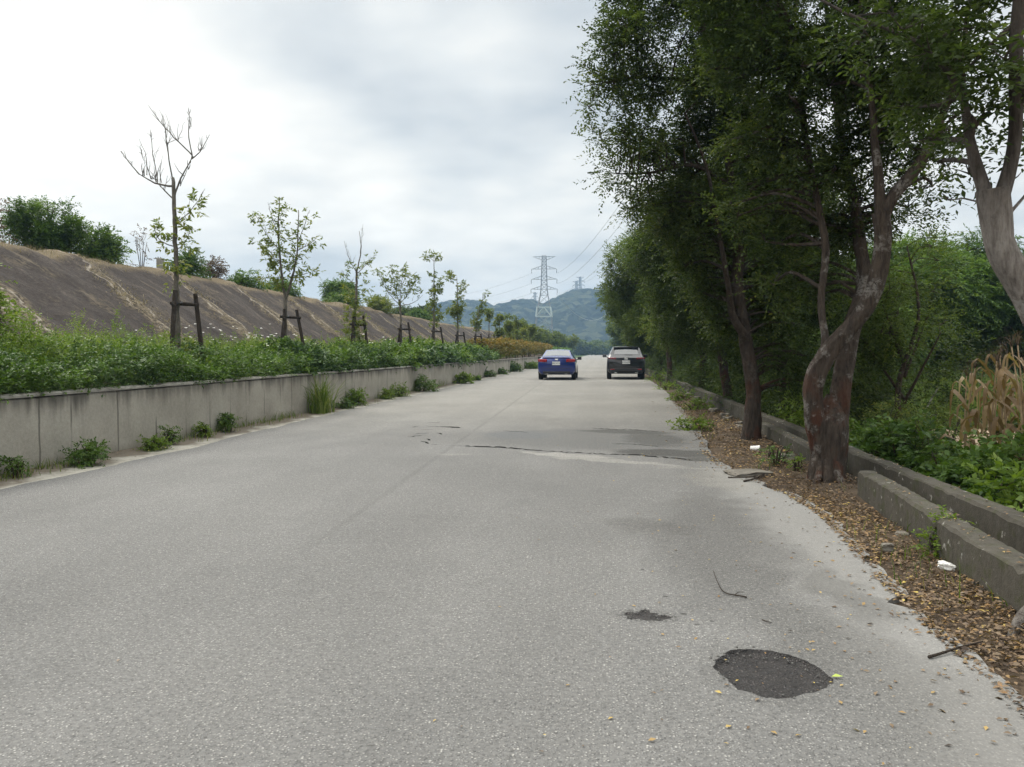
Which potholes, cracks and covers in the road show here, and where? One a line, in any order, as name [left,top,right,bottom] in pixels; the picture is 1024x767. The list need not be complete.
crack [459,428,693,461]
